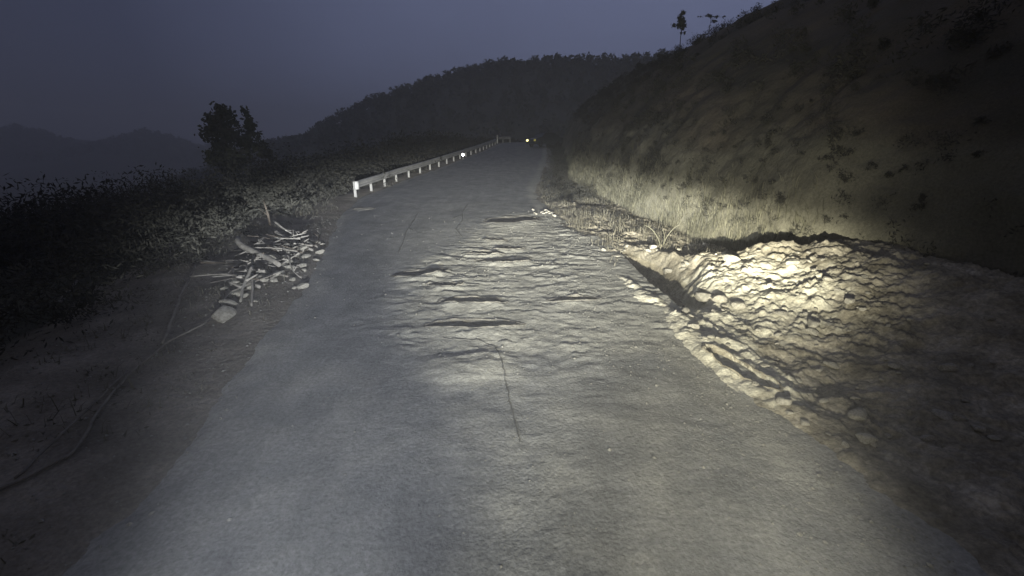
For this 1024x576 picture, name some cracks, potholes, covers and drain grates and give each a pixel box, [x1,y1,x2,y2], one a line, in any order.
pothole [421,318,526,328]
crack [444,338,520,442]
